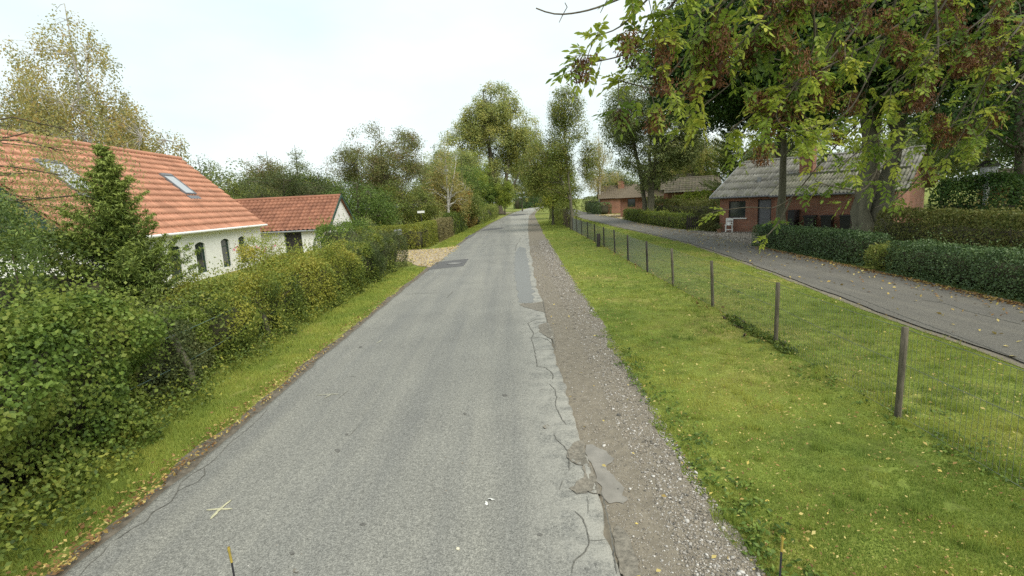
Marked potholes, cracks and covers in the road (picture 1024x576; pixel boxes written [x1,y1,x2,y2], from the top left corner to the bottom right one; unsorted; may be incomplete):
crack [529,302,570,490]
crack [572,492,617,572]
pothole [567,440,601,495]
crack [80,408,268,575]
